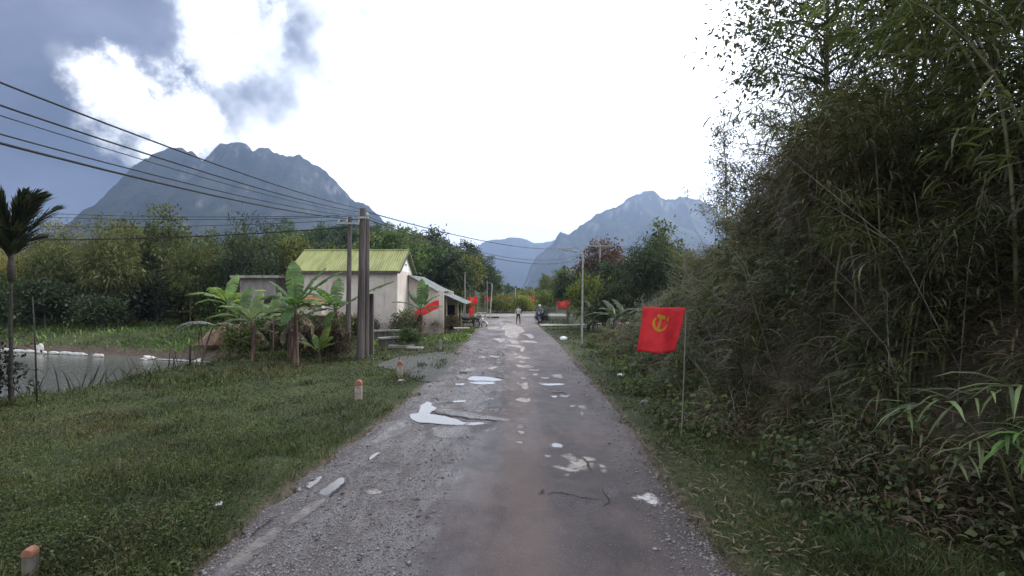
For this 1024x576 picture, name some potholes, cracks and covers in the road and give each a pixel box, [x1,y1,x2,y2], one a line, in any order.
pothole [406,400,491,426]
pothole [550,453,590,472]
crack [547,489,610,506]
pothole [501,323,526,338]
pothole [630,491,662,506]
